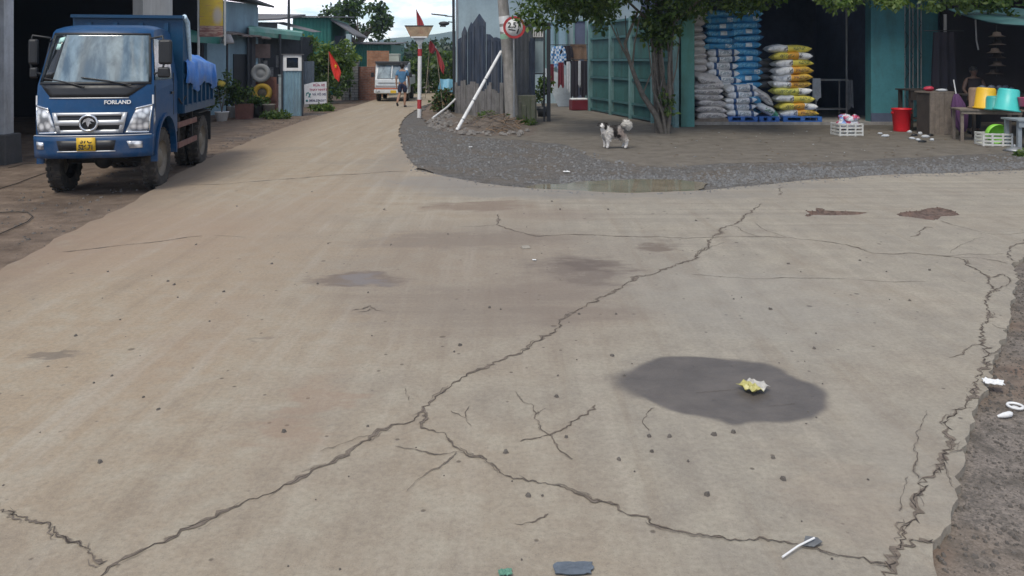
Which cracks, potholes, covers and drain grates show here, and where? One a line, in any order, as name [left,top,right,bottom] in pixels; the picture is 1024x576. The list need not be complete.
crack [1,204,1024,576]
pothole [897,207,959,220]
pothole [805,208,867,217]
